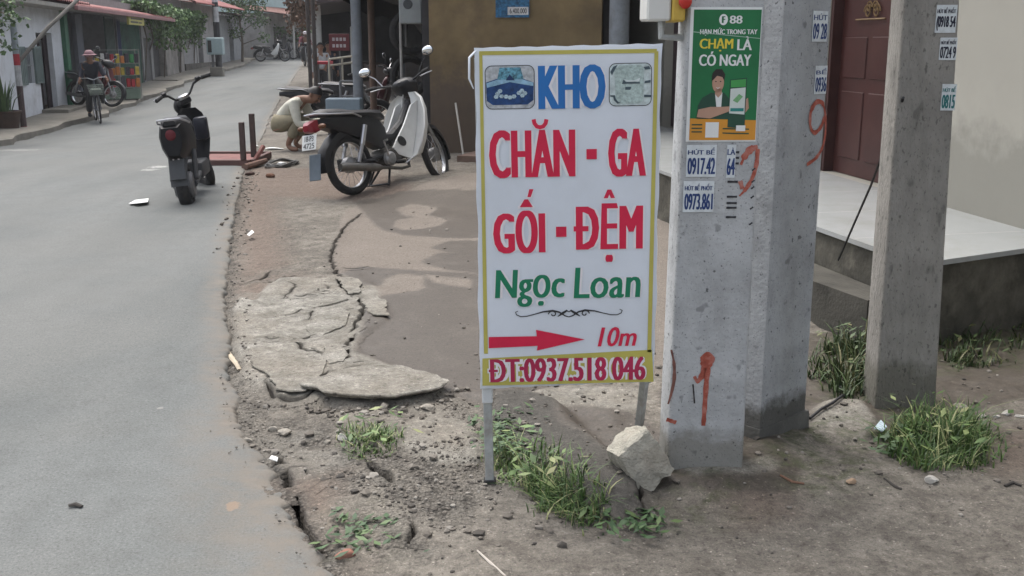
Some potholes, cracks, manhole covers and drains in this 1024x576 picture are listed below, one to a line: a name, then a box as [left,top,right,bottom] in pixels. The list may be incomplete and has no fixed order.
crack [236,213,373,409]
crack [263,453,341,557]
